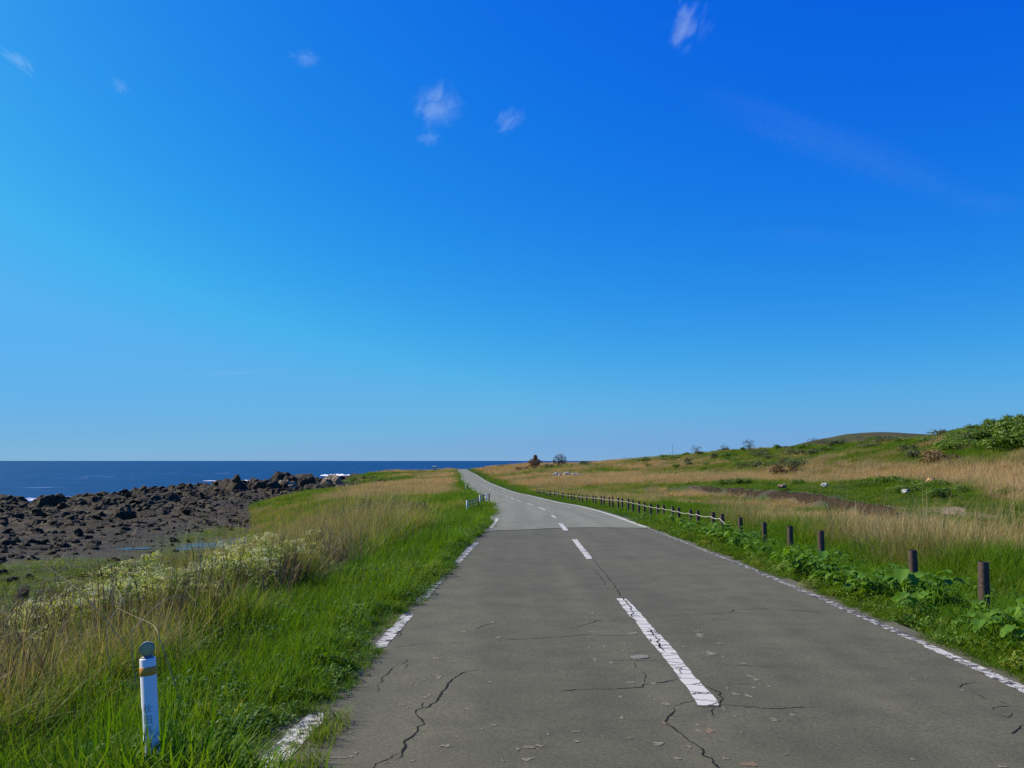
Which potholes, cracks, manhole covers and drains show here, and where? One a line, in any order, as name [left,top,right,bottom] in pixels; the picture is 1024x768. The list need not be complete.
crack [373,669,478,768]
crack [377,619,615,690]
crack [958,682,1022,733]
crack [564,558,682,691]
